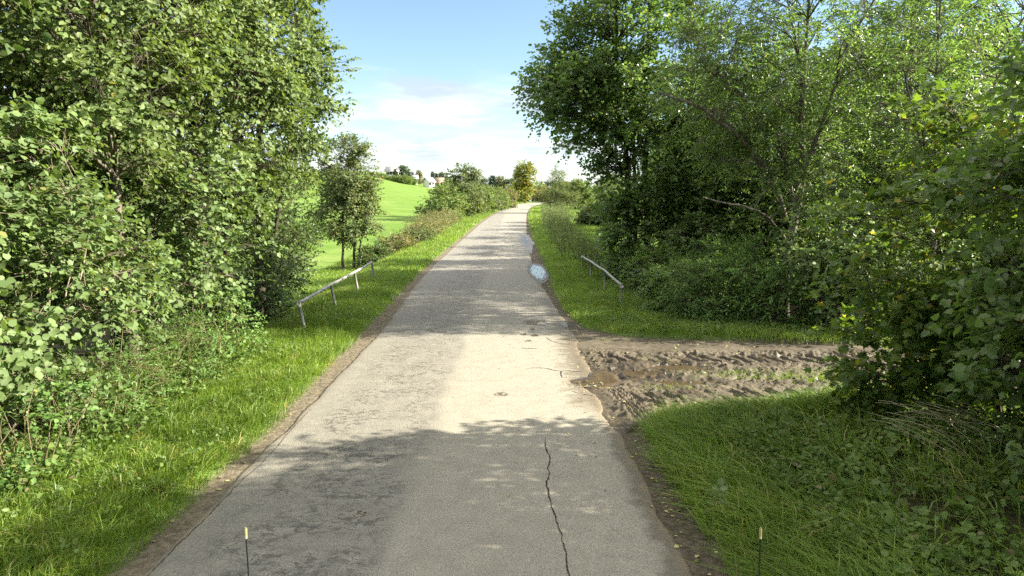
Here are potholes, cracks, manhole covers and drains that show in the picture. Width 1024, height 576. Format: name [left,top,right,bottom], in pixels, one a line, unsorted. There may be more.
crack [545,437,570,576]
